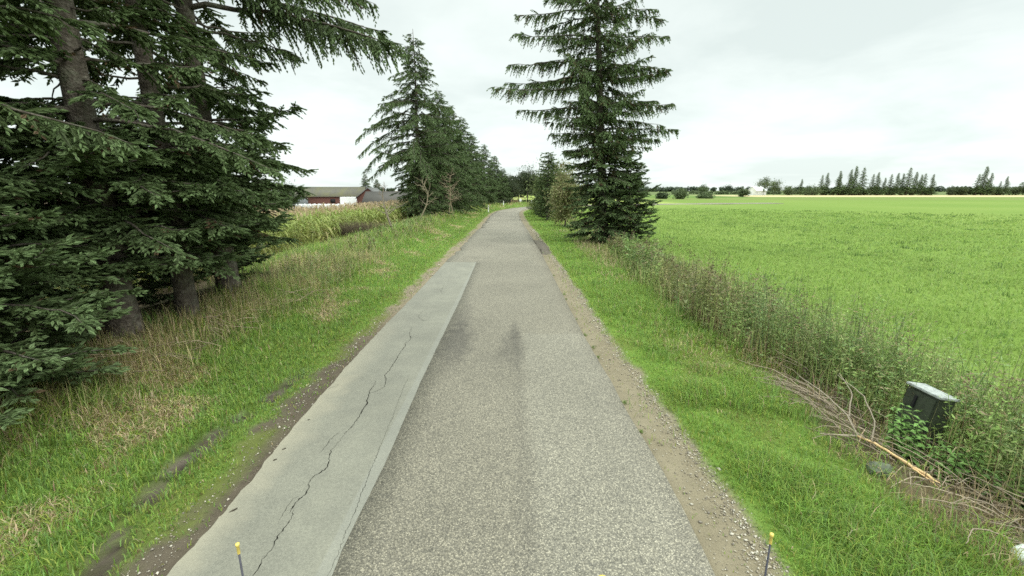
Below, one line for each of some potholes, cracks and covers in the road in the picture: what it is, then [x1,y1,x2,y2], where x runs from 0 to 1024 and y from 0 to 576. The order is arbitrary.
crack [253,332,411,576]
